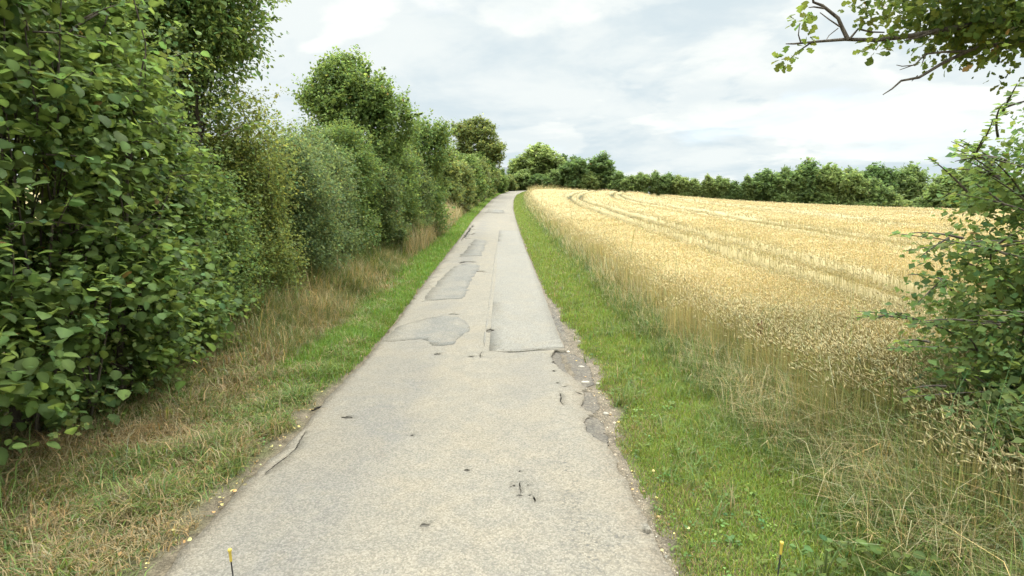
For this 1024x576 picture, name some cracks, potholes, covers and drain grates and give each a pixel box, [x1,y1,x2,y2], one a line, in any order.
pothole [552,350,594,388]
pothole [582,392,600,413]
pothole [583,416,609,446]
